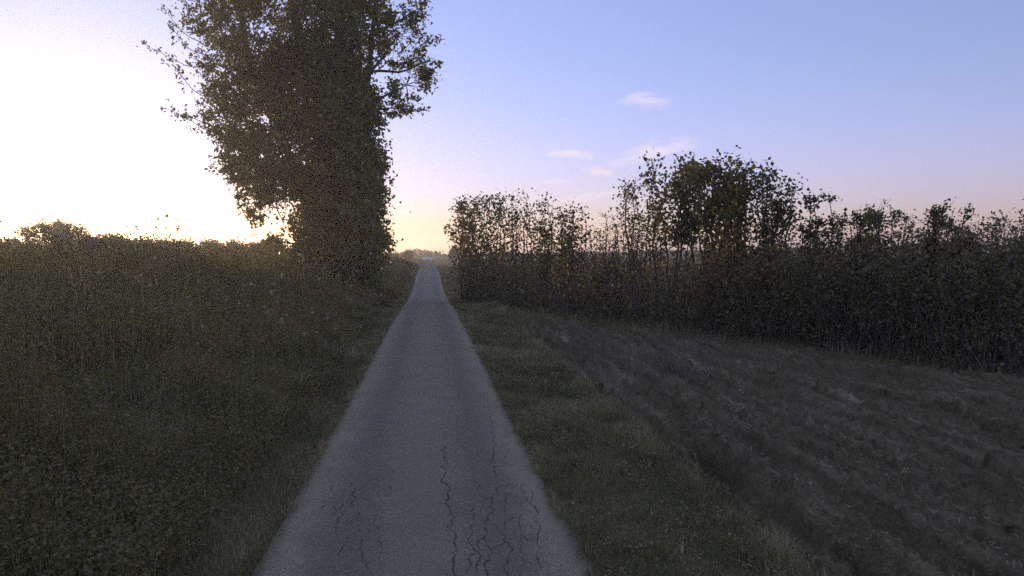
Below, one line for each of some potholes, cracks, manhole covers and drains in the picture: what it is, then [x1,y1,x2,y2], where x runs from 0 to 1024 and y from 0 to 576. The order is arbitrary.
crack [440,409,541,576]
crack [320,458,402,570]
